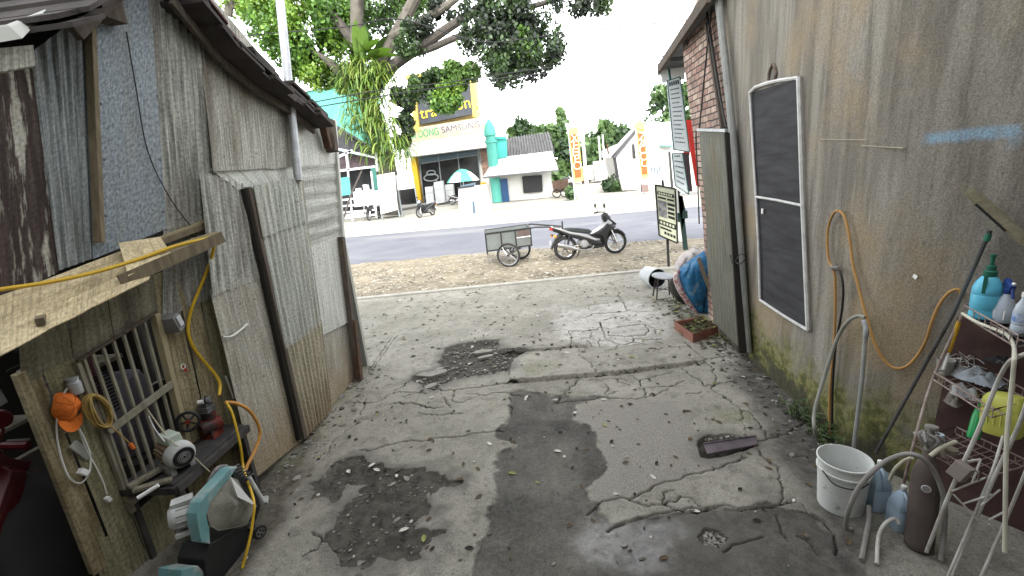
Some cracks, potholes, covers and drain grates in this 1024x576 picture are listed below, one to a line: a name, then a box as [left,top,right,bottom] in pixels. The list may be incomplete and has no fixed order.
pothole [412,341,527,390]
pothole [312,456,464,570]
crack [357,298,838,556]
pothole [699,530,731,553]
